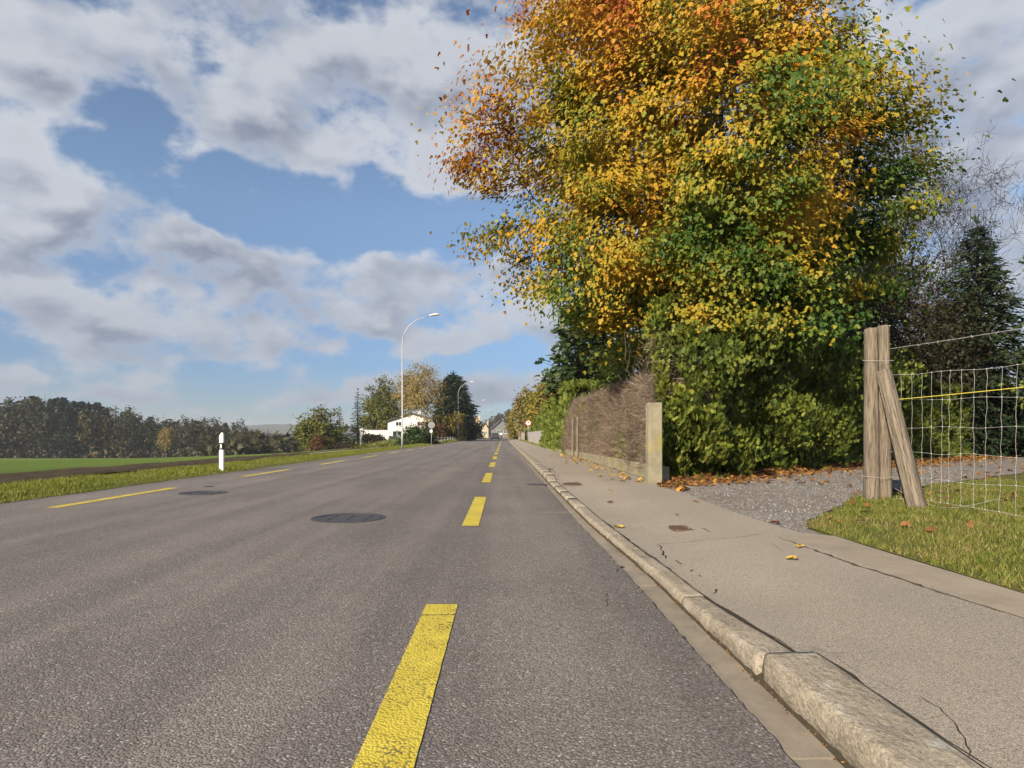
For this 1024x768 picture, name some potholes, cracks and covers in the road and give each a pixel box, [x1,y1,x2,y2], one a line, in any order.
manhole cover [310,513,386,523]
